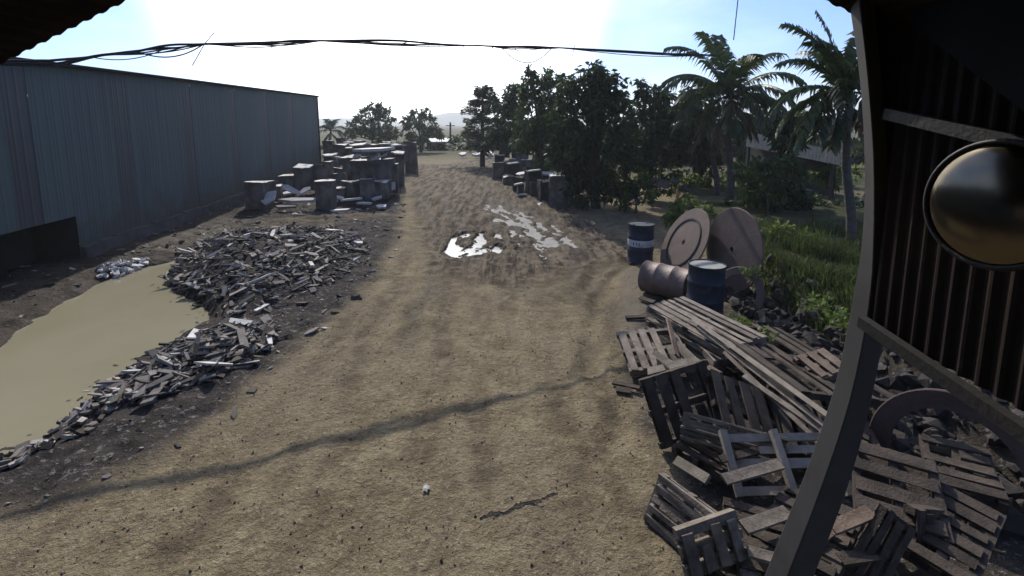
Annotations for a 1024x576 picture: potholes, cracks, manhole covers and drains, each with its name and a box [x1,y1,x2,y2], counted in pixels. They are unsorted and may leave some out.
crack [480,492,558,520]
